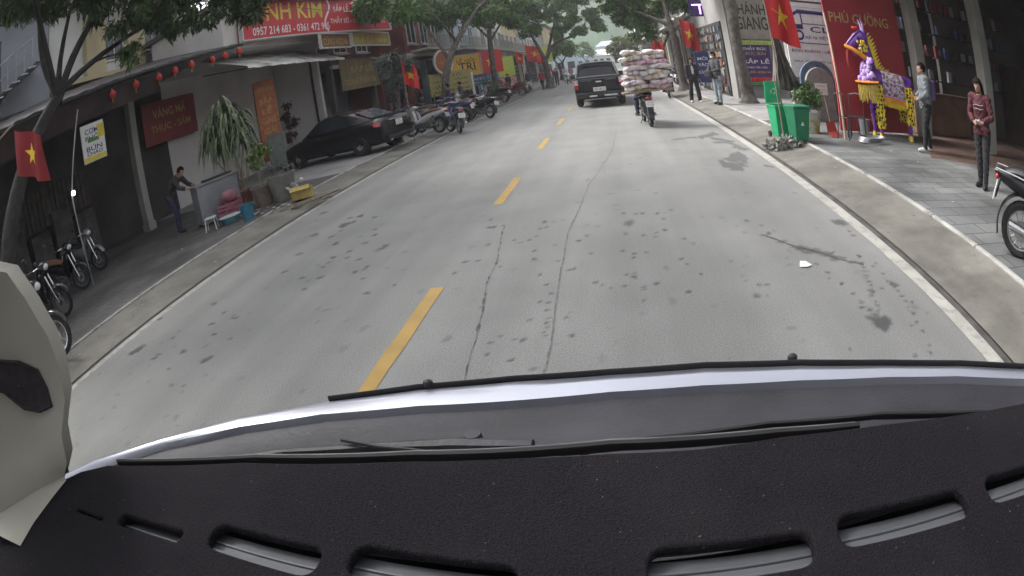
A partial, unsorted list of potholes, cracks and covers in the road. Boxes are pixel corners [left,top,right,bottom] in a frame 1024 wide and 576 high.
crack [762,234,864,265]
crack [542,131,617,374]
crack [464,227,505,380]
